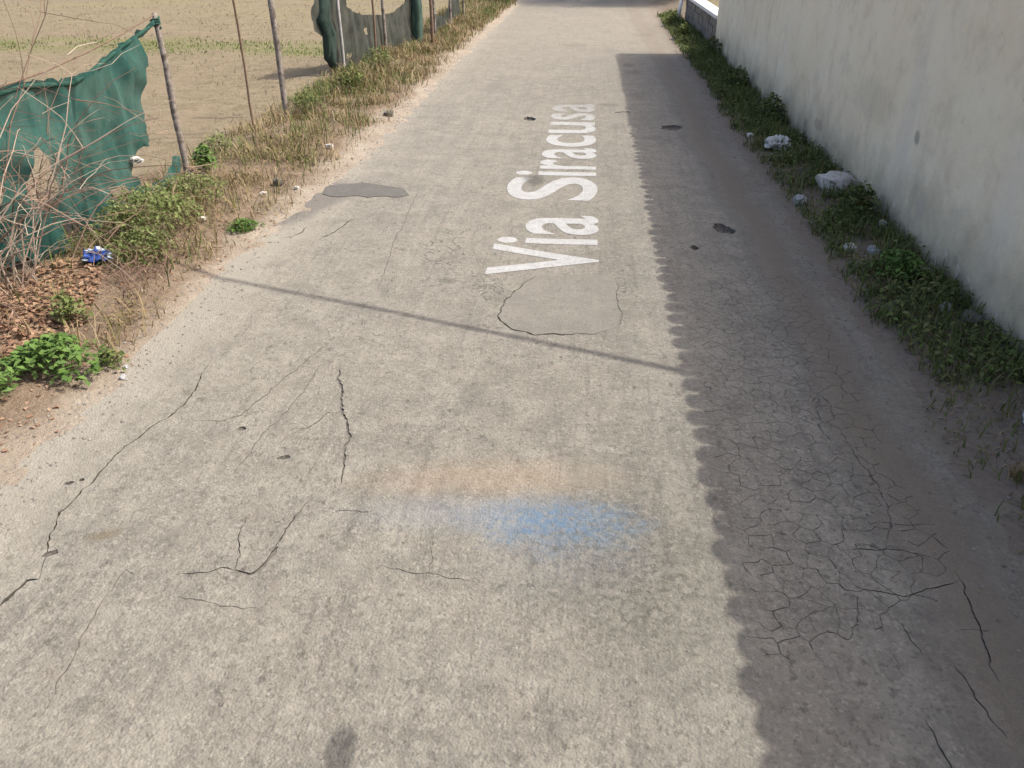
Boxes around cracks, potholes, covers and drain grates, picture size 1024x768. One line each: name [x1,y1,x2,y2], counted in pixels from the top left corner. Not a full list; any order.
crack [305,367,352,484]
crack [955,667,1006,736]
crack [693,274,953,657]
crack [47,570,133,708]
crack [423,232,610,335]
crack [0,370,204,605]
pothole [712,223,736,234]
crack [176,501,309,575]
crack [235,347,324,471]
